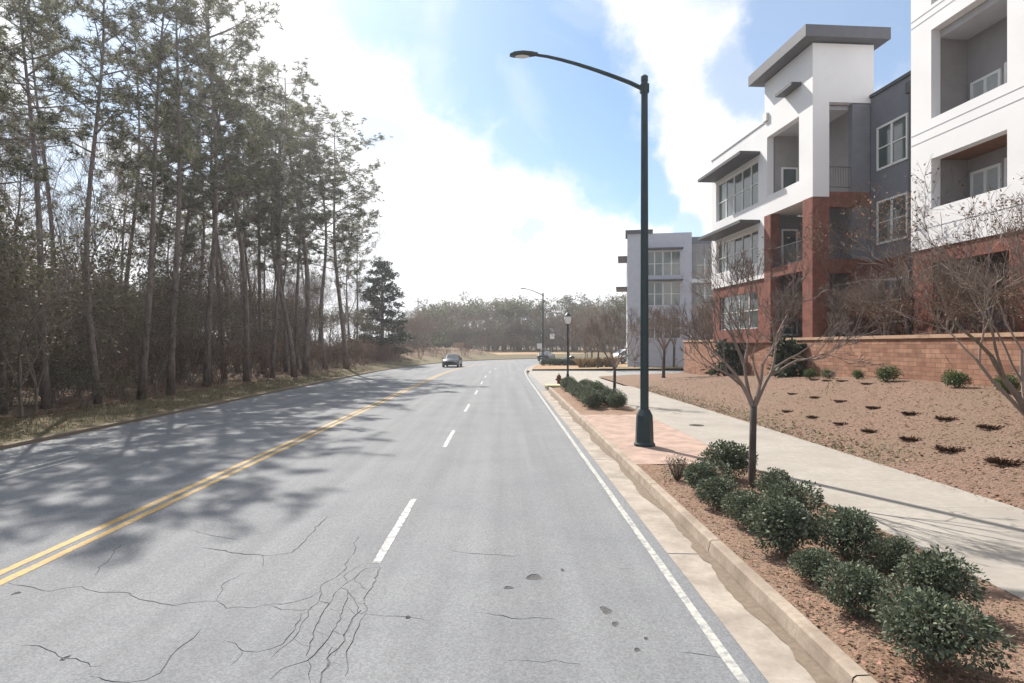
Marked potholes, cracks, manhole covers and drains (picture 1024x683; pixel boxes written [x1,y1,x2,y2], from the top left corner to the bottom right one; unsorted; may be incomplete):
crack [216,541,424,683]
crack [24,632,199,683]
crack [9,545,204,606]
crack [198,517,327,563]
